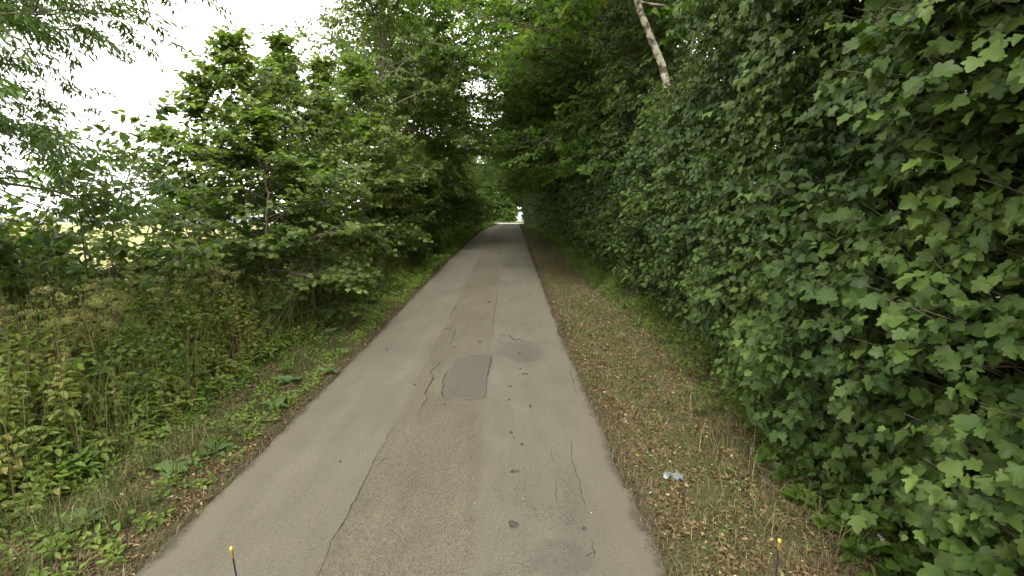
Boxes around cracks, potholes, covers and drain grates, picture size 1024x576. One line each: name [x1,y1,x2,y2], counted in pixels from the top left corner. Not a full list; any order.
crack [310,425,397,575]
crack [492,280,534,344]
crack [555,442,586,509]
crack [419,306,457,413]
